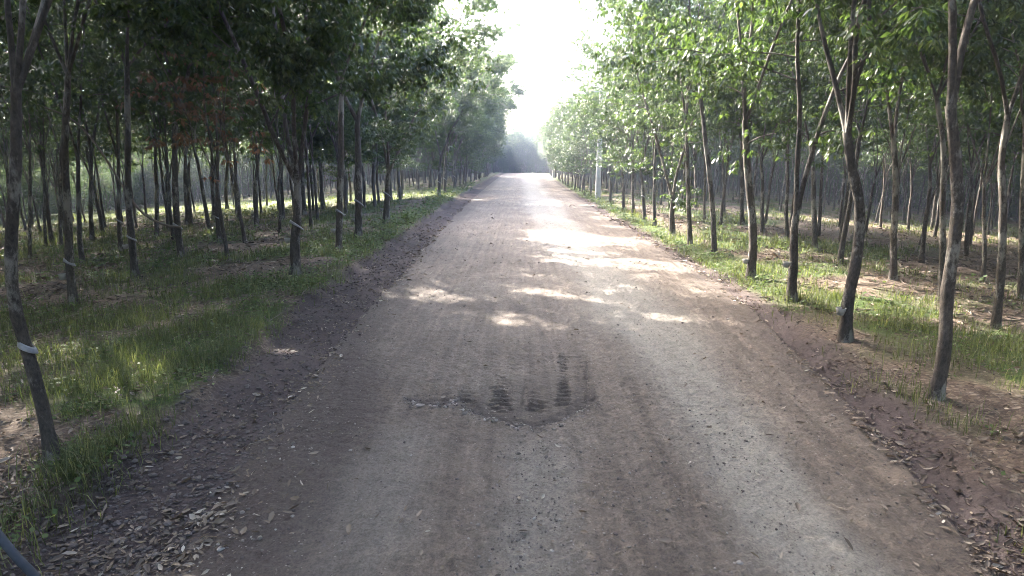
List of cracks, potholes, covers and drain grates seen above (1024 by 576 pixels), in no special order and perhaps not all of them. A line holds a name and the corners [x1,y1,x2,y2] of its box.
pothole [453,367,600,430]
